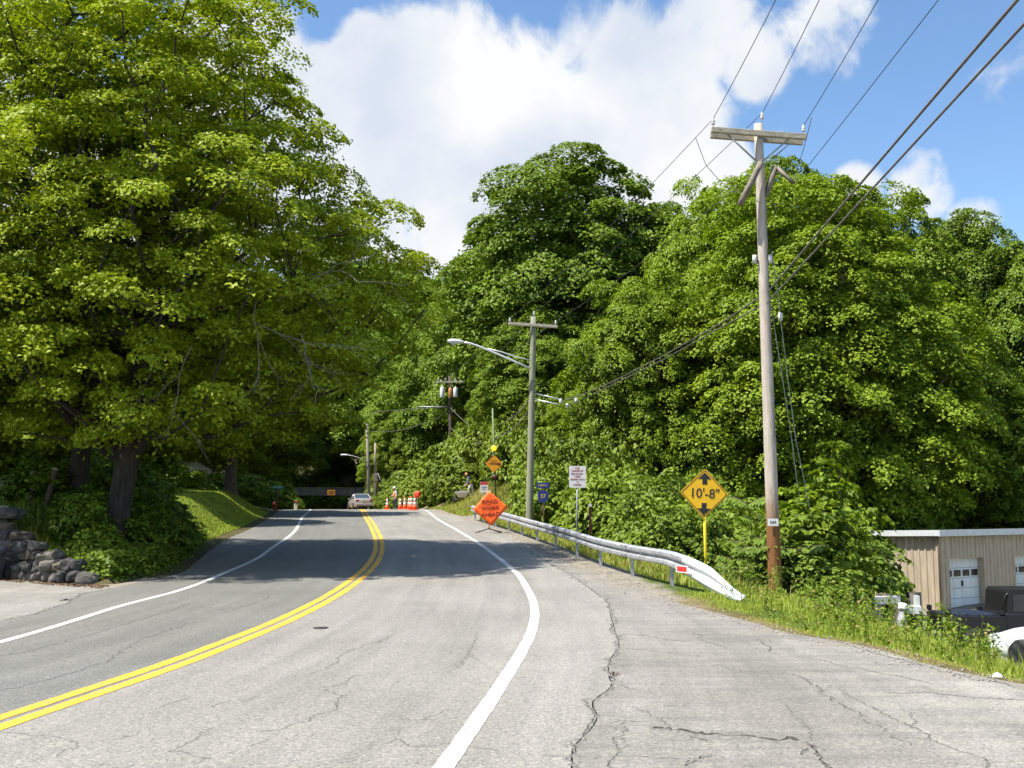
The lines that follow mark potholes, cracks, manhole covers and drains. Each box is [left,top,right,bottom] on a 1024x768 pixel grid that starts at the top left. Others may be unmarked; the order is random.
crack [169,727,215,765]
crack [121,697,253,739]
crack [251,635,394,747]
crack [454,635,481,669]
crack [519,546,1024,768]
crack [0,602,194,691]
crack [361,709,499,752]
crack [0,731,80,757]
